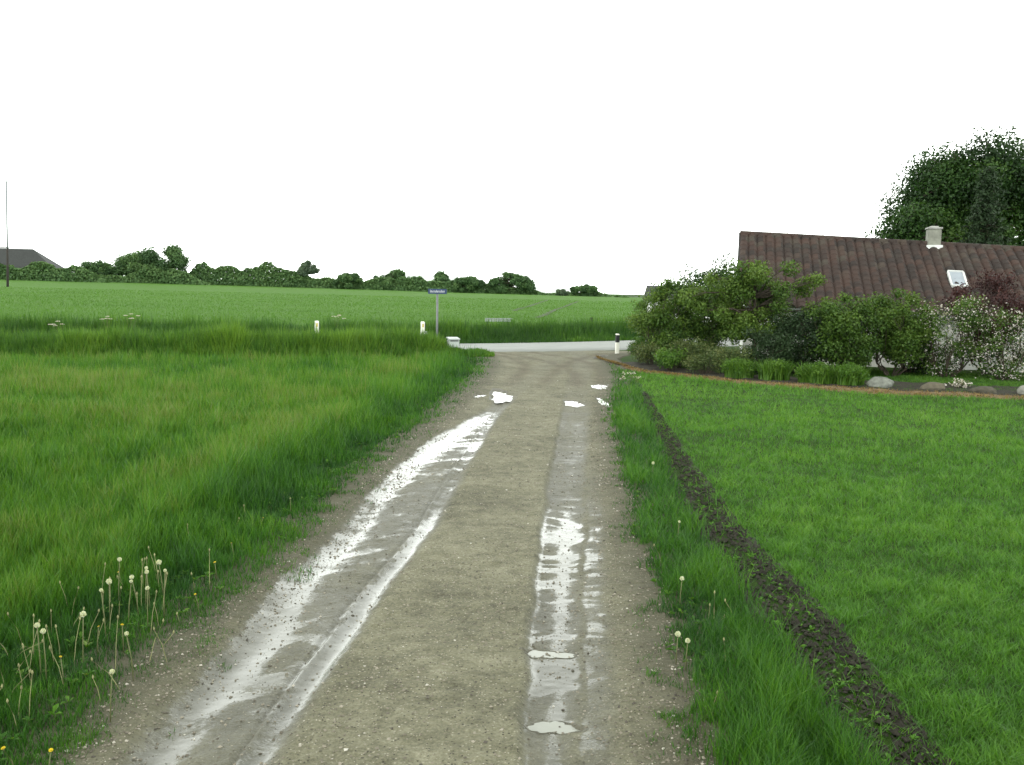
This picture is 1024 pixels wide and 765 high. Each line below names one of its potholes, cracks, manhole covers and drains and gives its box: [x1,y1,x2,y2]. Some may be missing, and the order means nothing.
pothole [563,400,587,408]
pothole [489,388,514,405]
pothole [523,721,589,735]
pothole [519,647,578,659]
